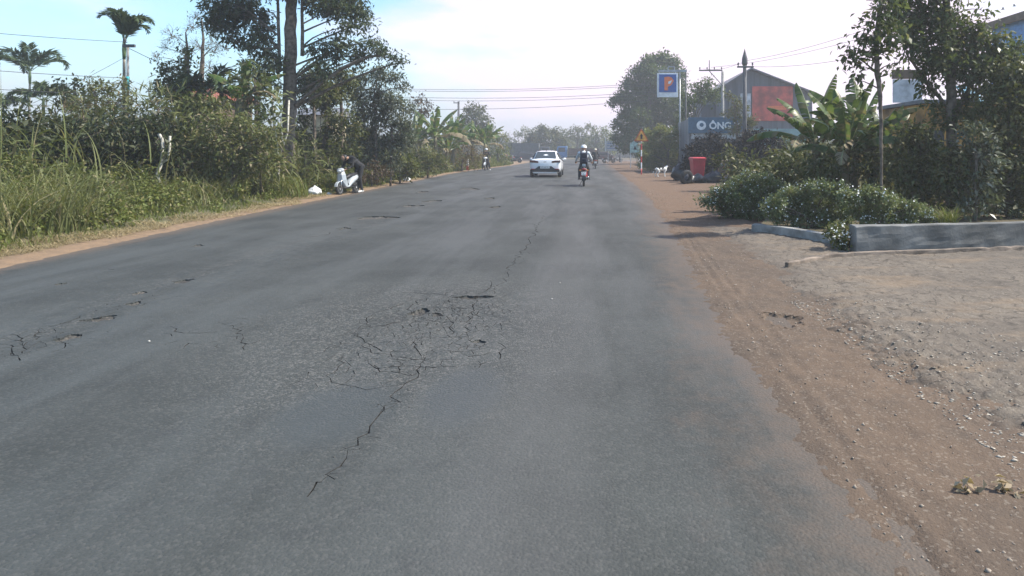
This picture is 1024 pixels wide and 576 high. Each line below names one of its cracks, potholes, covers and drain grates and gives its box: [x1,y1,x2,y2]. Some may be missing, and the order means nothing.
crack [1,294,169,361]
crack [154,318,255,350]
pothole [52,334,82,342]
crack [292,212,546,497]
